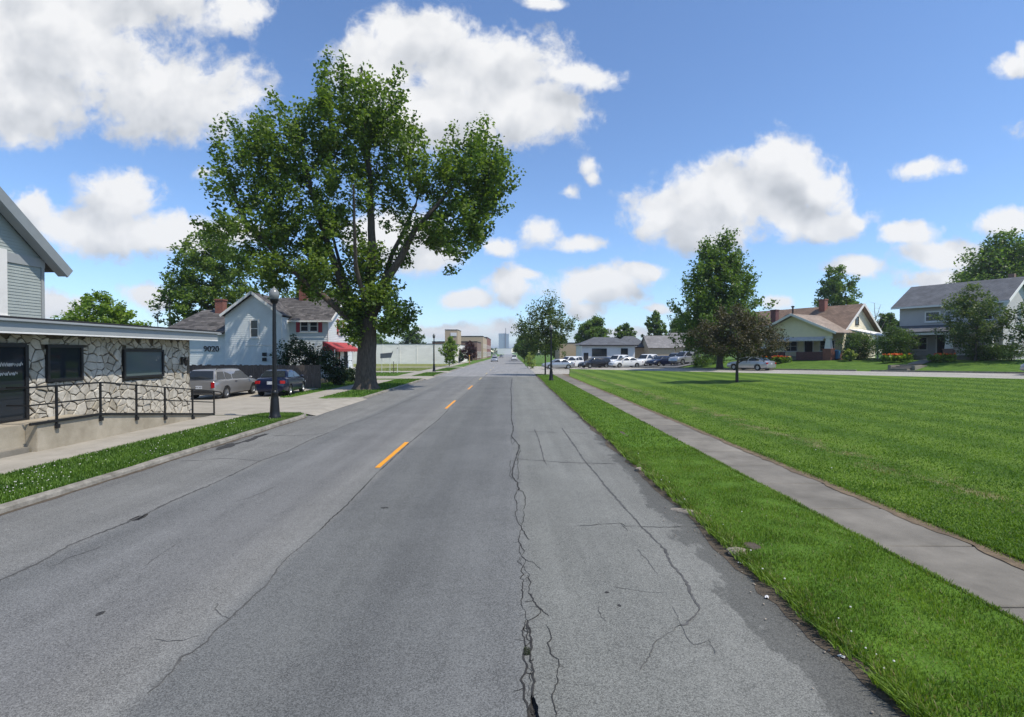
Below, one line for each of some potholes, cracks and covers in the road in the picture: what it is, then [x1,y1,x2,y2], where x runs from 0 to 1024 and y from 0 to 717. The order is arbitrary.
crack [509,380,715,716]
